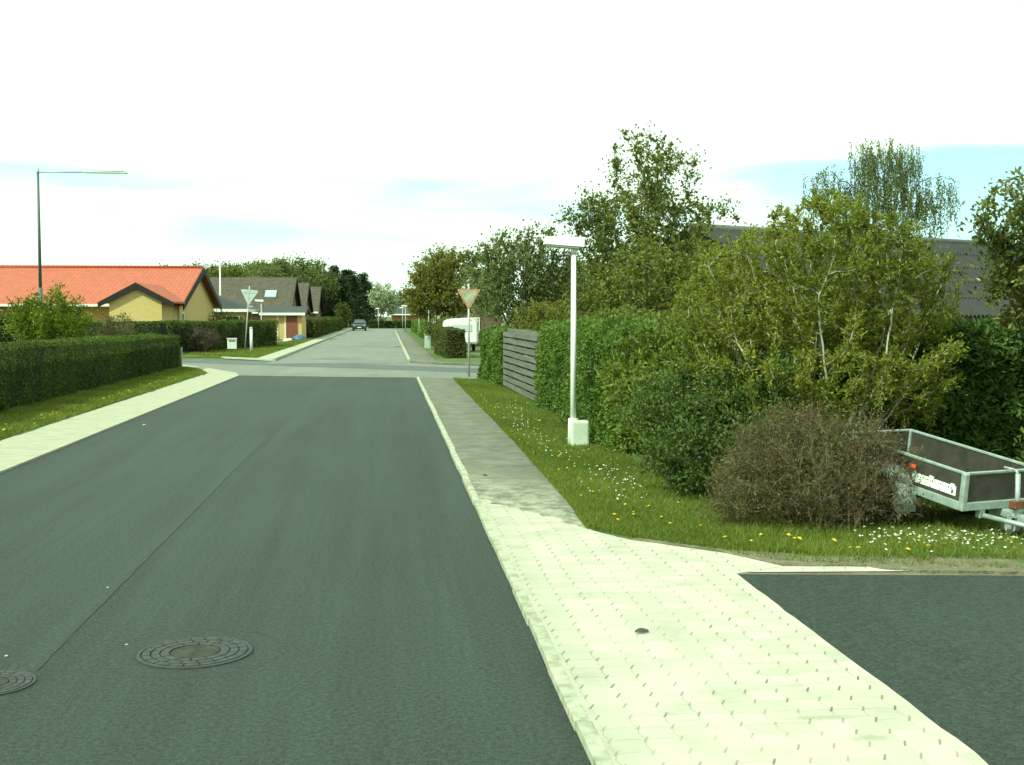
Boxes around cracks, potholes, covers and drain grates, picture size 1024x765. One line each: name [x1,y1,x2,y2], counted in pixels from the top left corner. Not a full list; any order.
manhole cover [136,637,253,669]
manhole cover [0,670,37,695]
